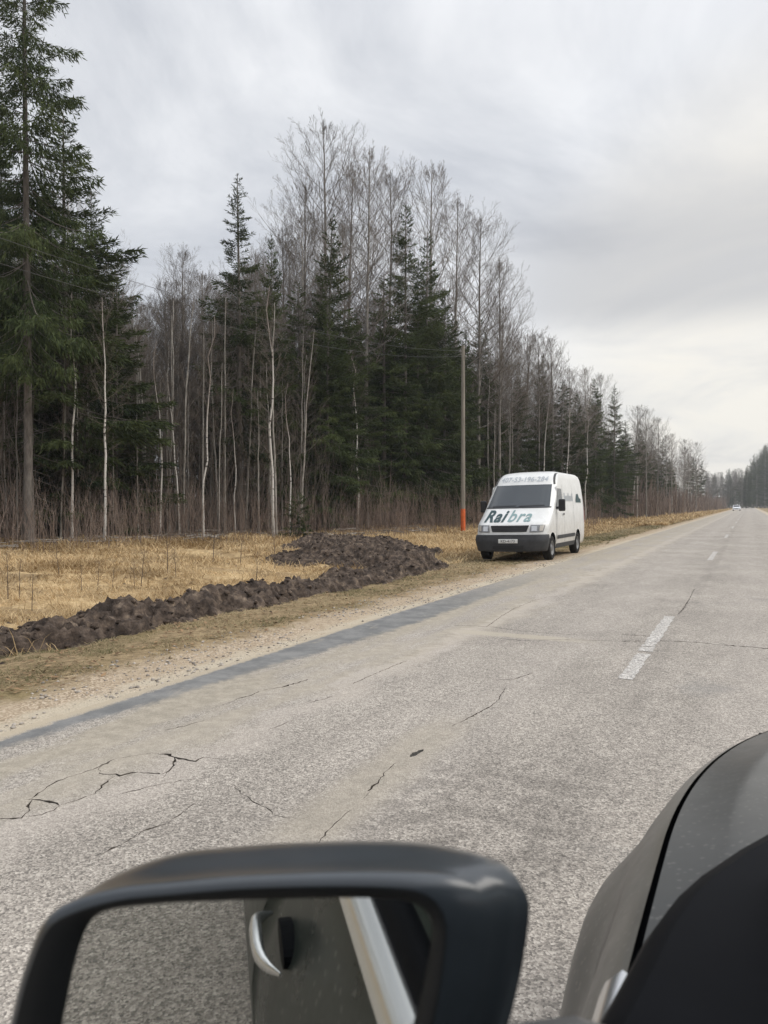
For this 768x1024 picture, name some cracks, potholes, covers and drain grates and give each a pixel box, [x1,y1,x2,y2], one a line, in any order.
crack [99,803,195,855]
crack [454,673,532,725]
crack [319,763,395,842]
crack [0,753,219,819]
